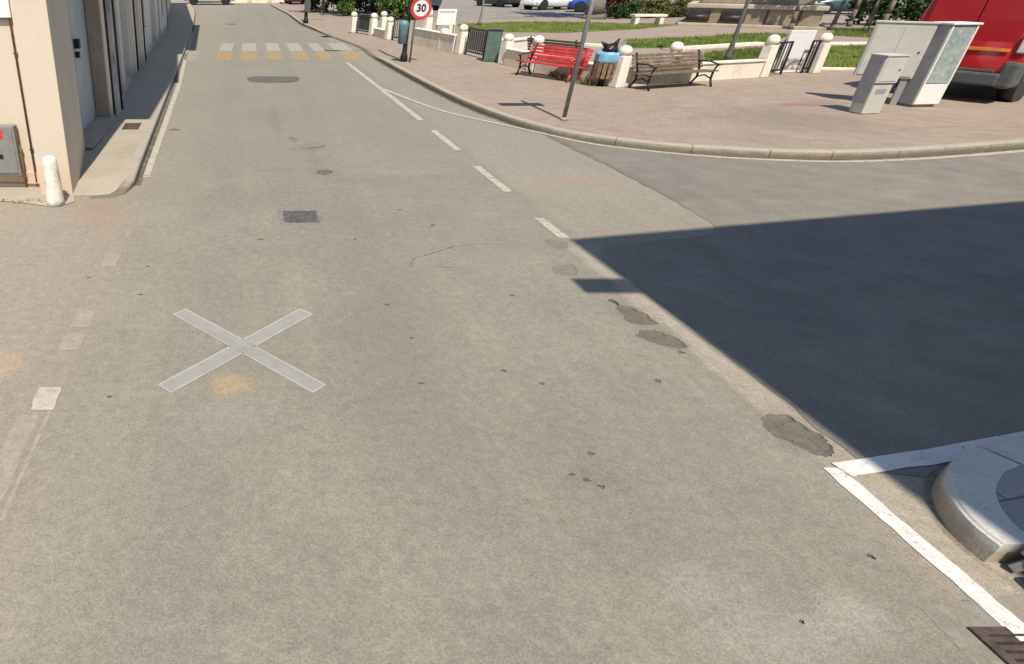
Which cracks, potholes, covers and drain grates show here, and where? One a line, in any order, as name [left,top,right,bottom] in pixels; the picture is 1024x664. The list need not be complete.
manhole cover [278,209,324,225]
drain grate [919,593,1024,664]
crack [411,244,502,268]
